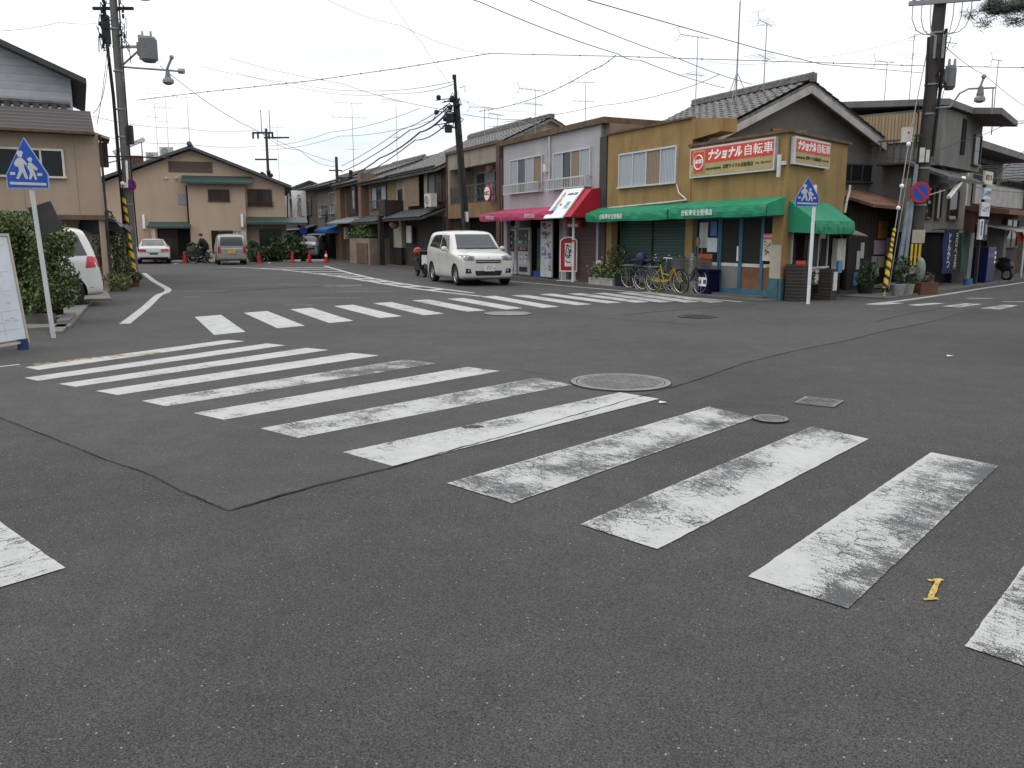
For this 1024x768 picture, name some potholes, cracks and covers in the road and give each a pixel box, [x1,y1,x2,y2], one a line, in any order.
manhole cover [569,373,672,392]
manhole cover [752,414,789,423]
